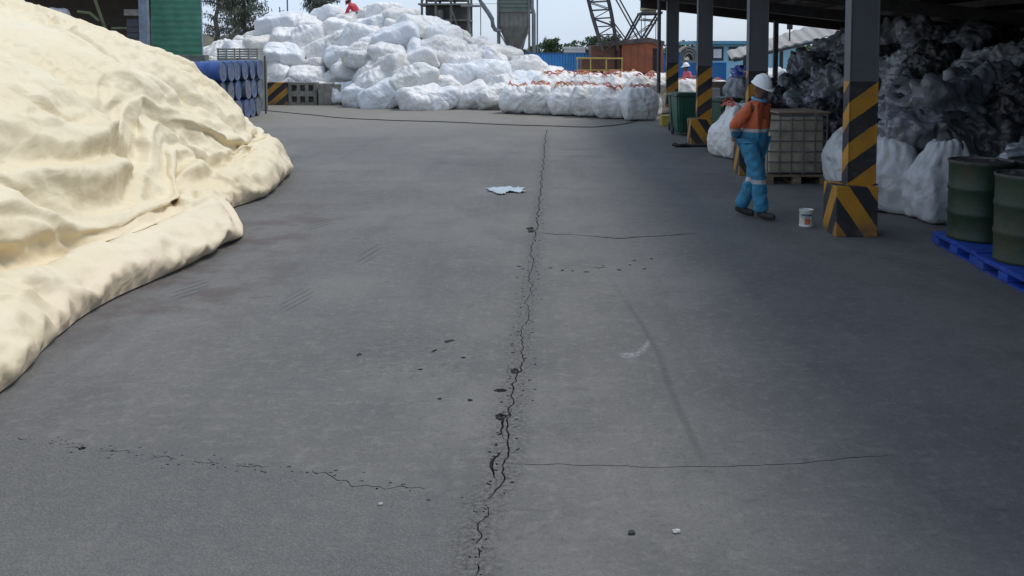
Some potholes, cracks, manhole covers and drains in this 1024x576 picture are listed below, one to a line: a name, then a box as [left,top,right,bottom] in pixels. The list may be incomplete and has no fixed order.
crack [469,130,888,576]
